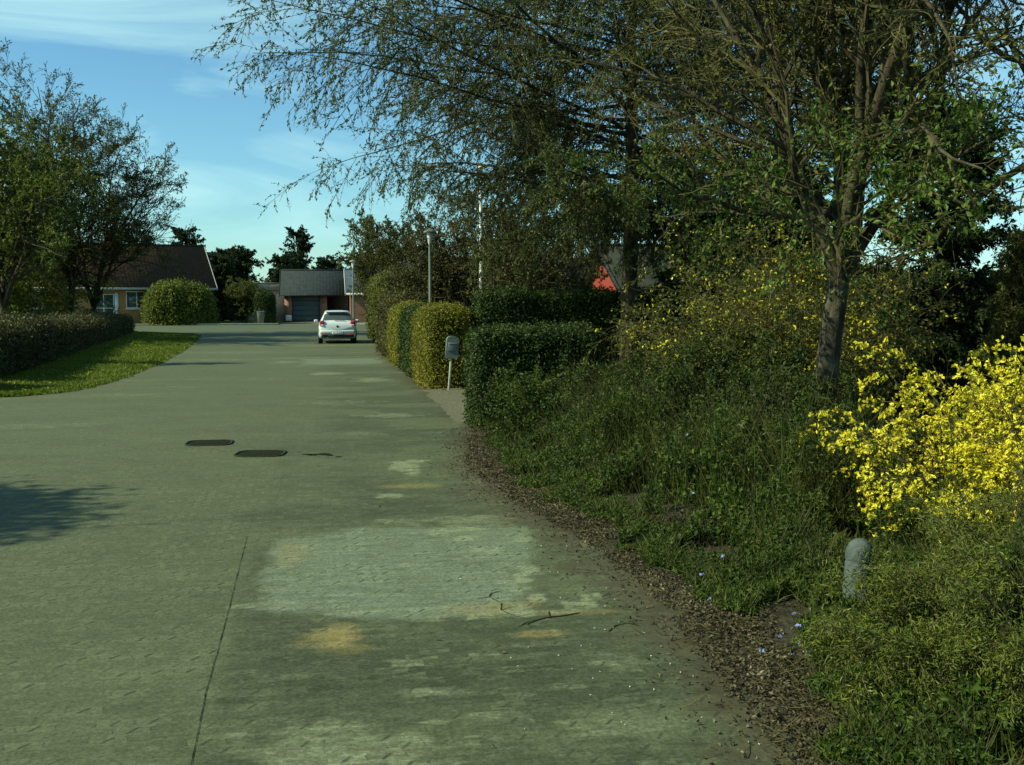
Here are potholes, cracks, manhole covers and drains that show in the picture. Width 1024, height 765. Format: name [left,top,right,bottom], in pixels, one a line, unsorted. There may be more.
crack [476,590,580,626]
